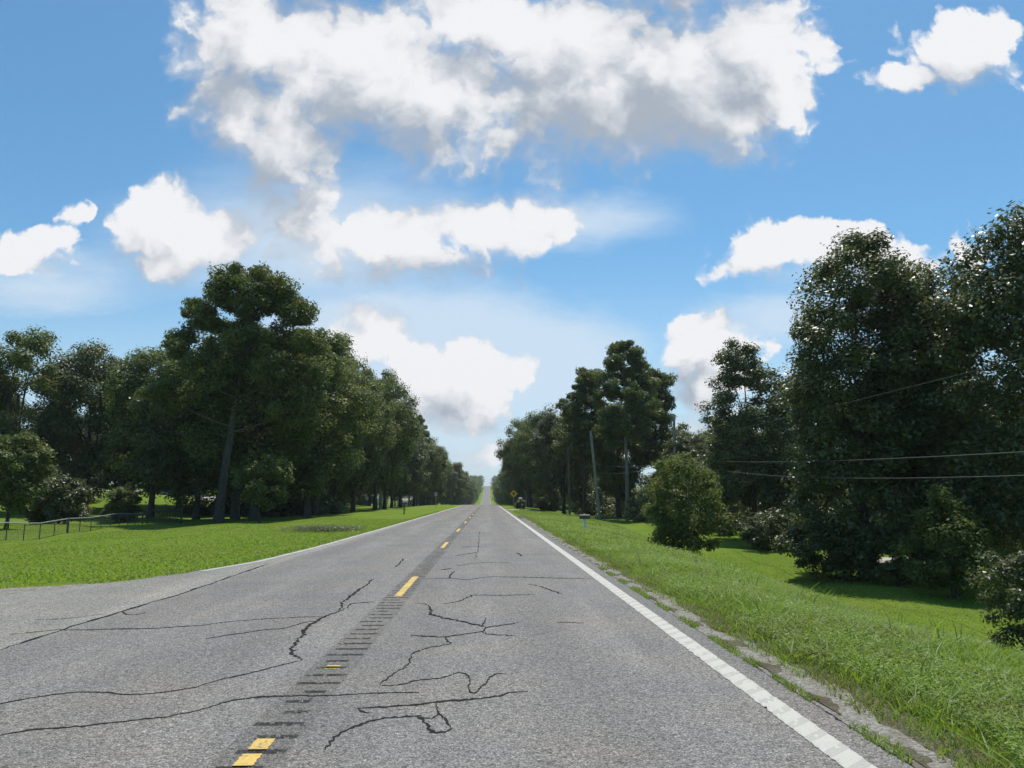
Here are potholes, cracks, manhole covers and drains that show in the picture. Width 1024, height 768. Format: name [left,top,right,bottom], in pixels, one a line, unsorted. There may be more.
crack [1,532,585,749]
